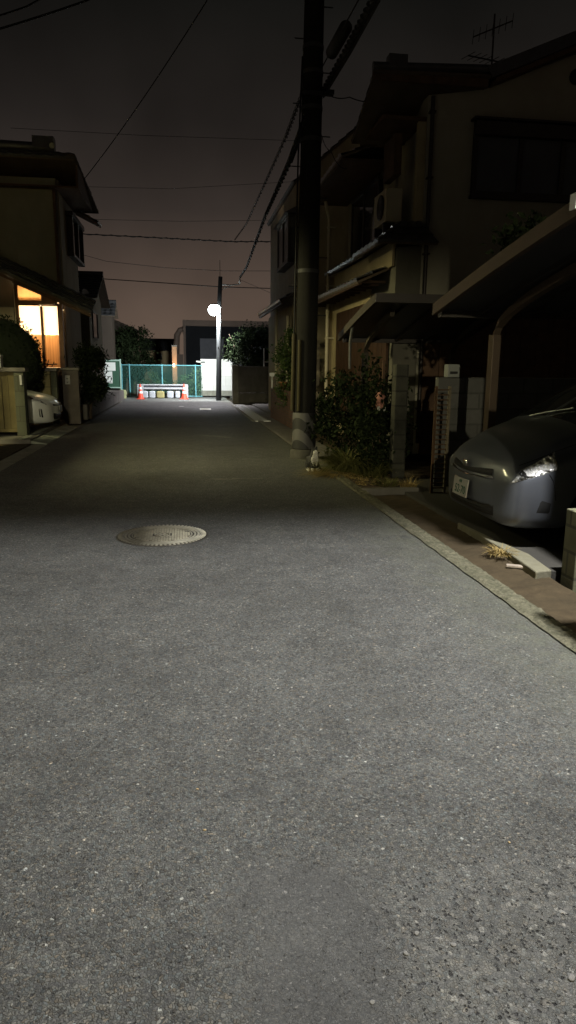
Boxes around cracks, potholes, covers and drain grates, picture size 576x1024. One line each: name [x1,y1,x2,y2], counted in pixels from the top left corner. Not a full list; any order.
manhole cover [115,525,208,547]
